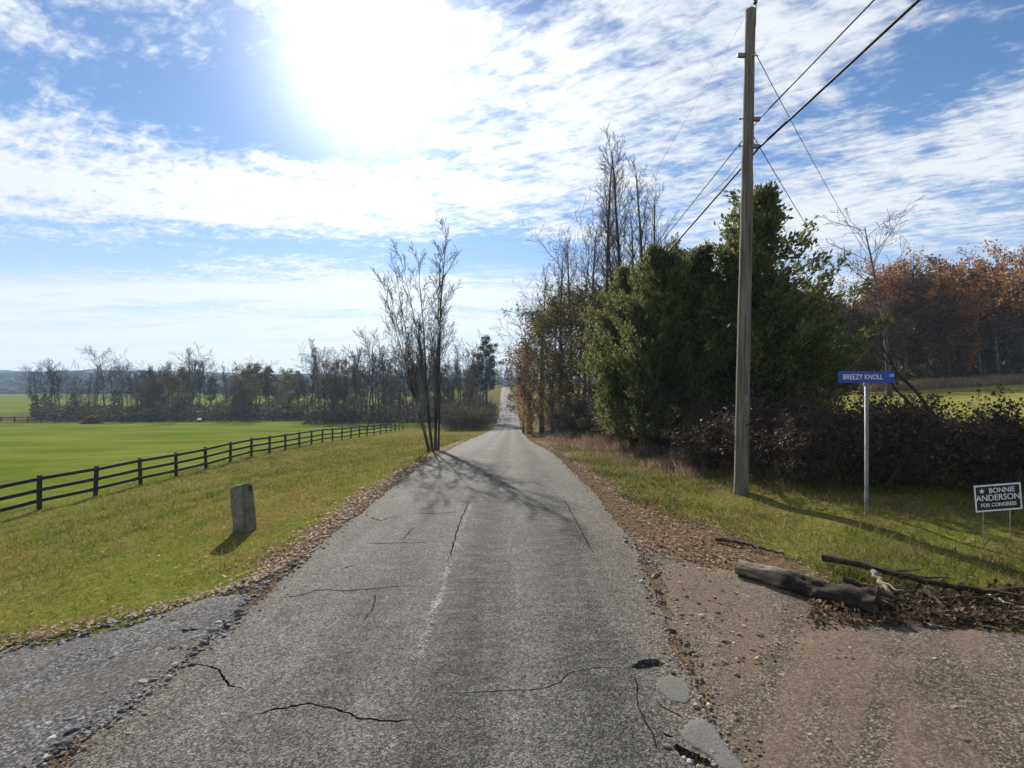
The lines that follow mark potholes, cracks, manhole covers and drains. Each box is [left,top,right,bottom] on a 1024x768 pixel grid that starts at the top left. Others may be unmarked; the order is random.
crack [183,662,422,722]
pothole [630,658,665,669]
crack [444,667,613,695]
crack [634,677,684,754]
crack [282,586,398,621]
crack [368,502,469,562]
